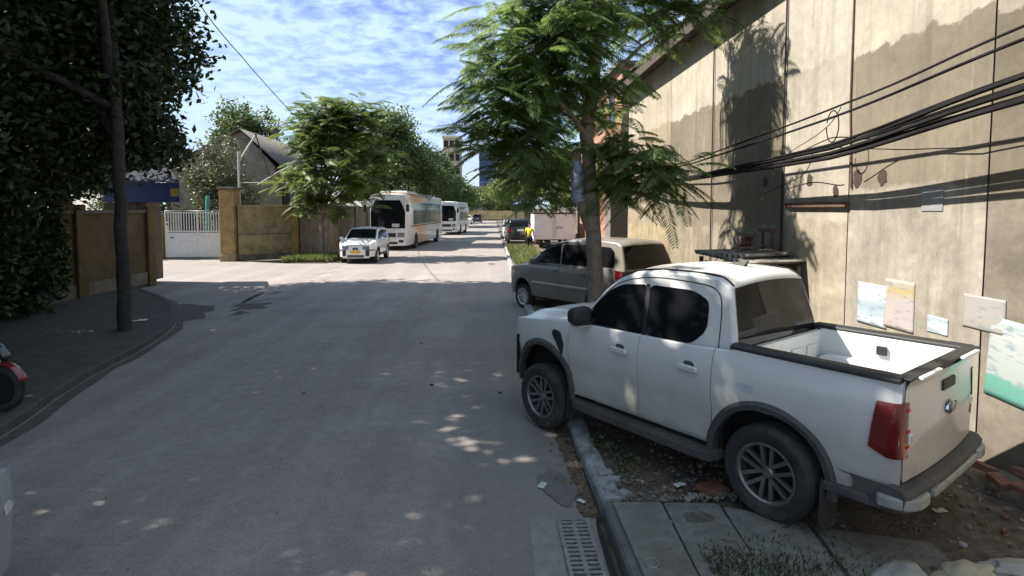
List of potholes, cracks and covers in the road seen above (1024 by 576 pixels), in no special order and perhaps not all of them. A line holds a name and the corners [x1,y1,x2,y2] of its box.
drain grate [556,518,607,576]
